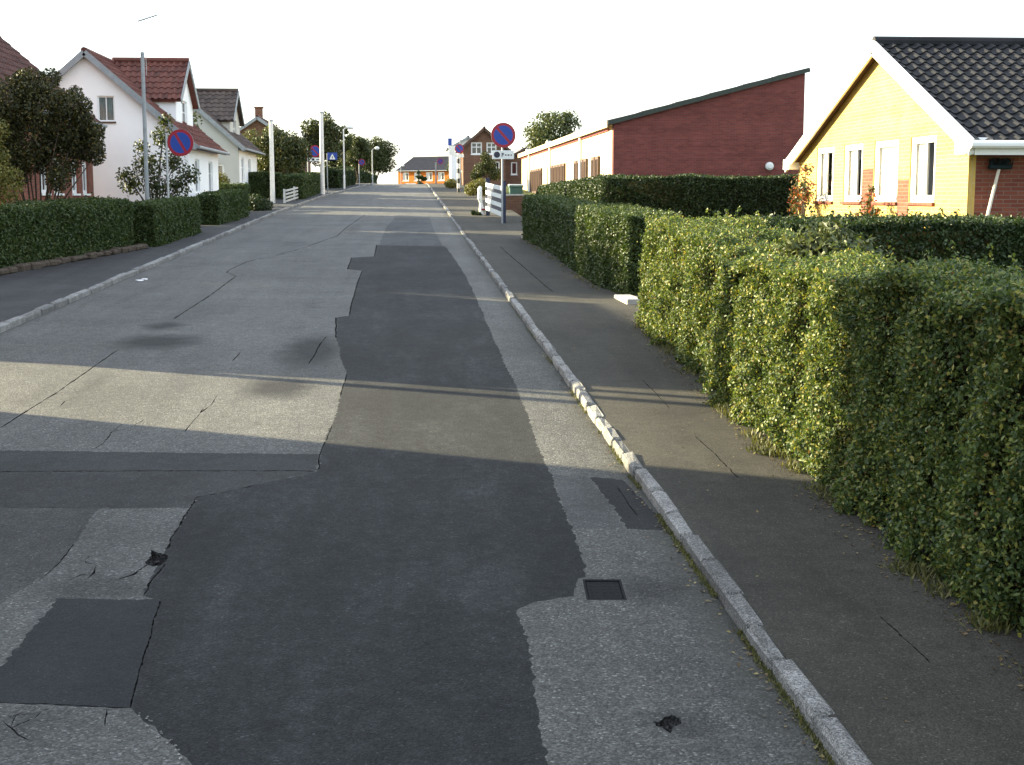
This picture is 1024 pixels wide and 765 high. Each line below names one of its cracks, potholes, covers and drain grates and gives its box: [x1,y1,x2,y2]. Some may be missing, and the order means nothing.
crack [3,703,110,740]
pothole [145,550,168,566]
crack [2,351,116,427]
crack [881,618,930,663]
crack [174,216,363,319]
crack [46,545,96,580]
pothole [652,715,681,733]
